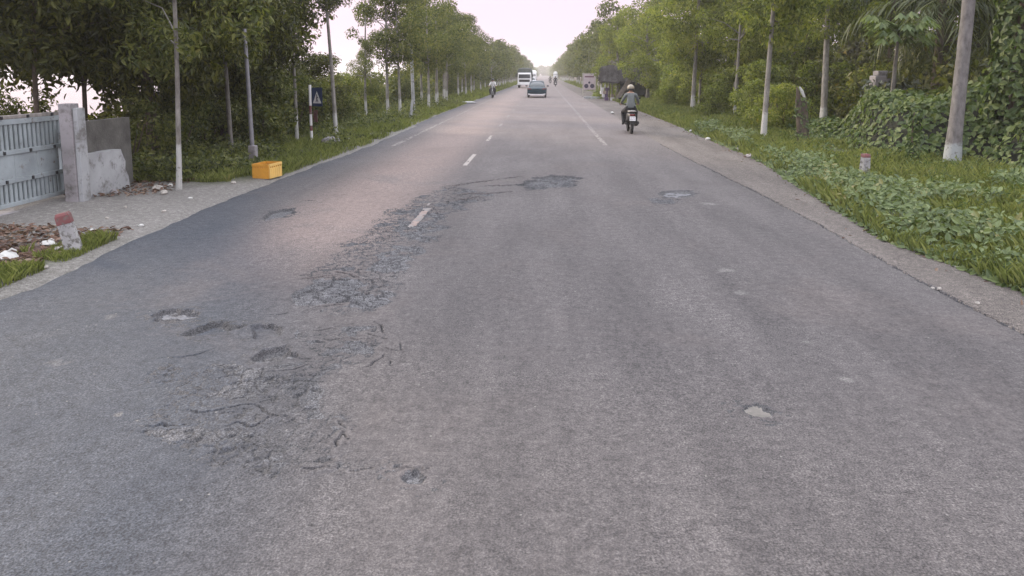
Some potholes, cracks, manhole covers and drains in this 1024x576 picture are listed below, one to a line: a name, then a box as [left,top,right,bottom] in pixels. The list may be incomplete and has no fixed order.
crack [111,176,524,488]
pothole [509,174,588,192]
pothole [254,206,305,223]
pothole [165,317,264,342]
pothole [652,189,703,200]
